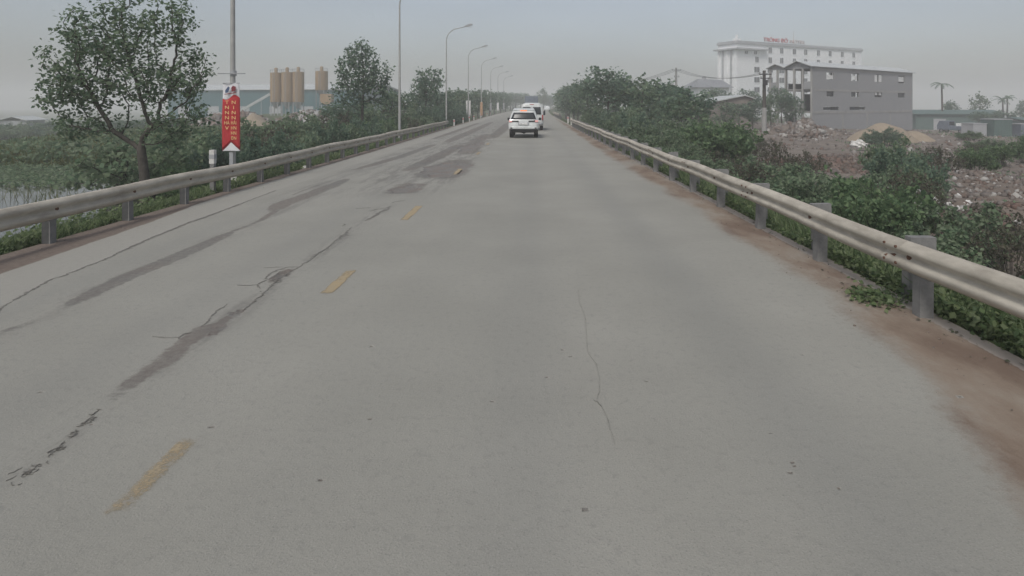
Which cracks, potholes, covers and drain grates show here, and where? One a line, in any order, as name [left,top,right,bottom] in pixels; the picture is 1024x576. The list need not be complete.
crack [6,409,102,486]
crack [152,304,227,339]
